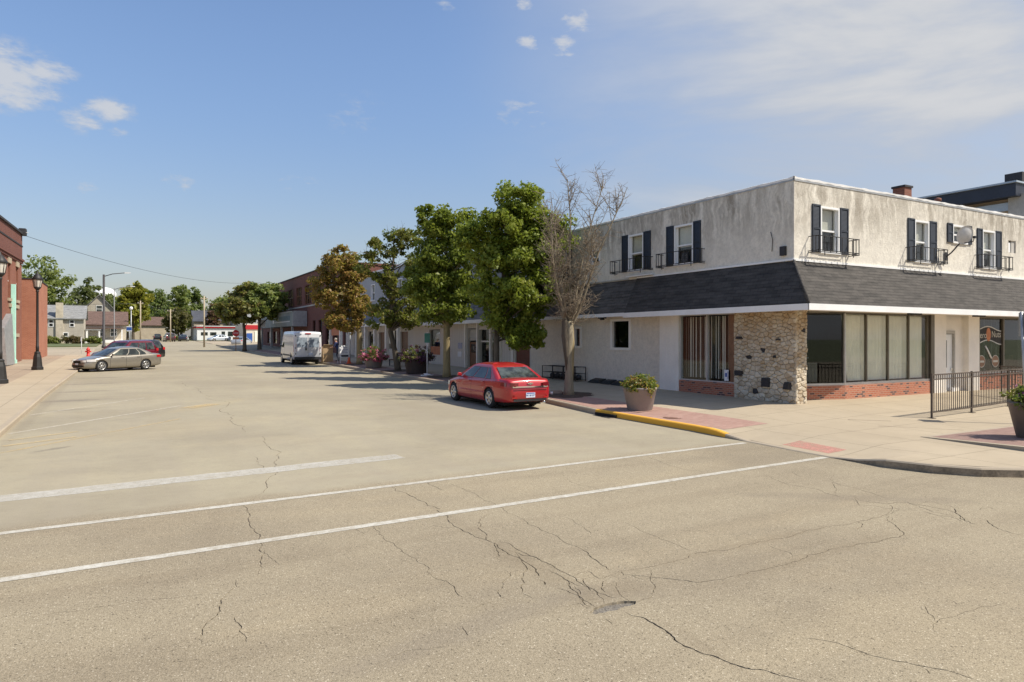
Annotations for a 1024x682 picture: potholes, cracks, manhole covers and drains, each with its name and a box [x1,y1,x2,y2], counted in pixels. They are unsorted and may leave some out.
crack [801,637,969,678]
crack [182,383,280,495]
crack [627,613,803,681]
crack [153,476,652,669]
crack [28,506,277,642]
crack [621,472,1019,596]
pothole [590,601,636,614]
